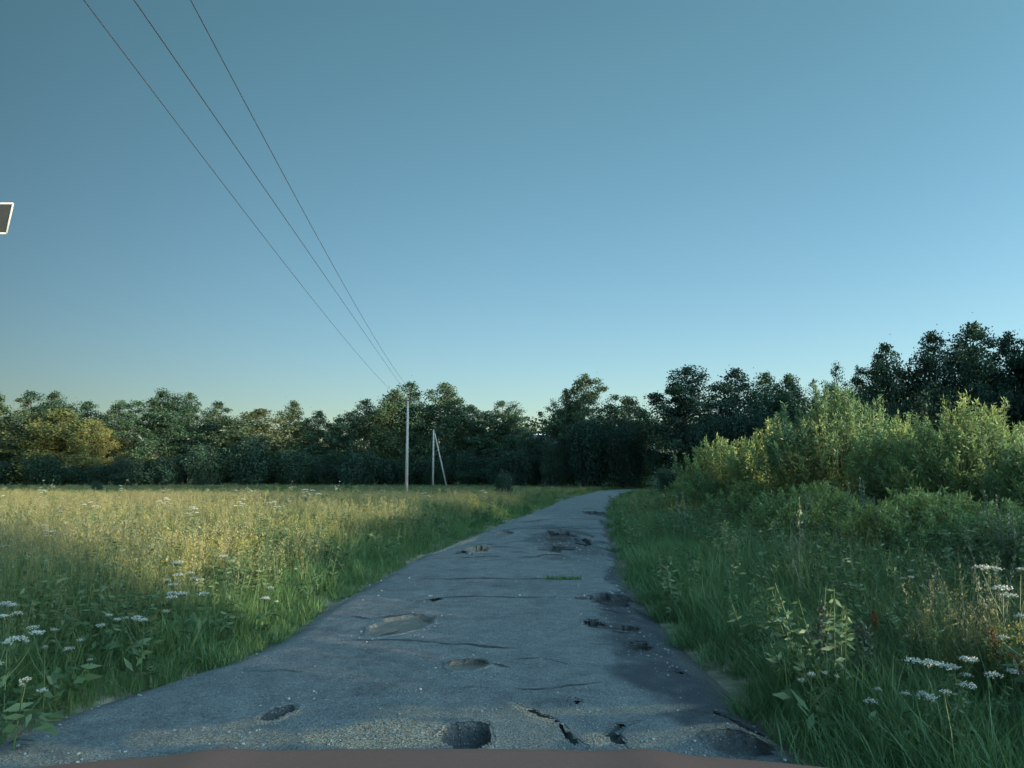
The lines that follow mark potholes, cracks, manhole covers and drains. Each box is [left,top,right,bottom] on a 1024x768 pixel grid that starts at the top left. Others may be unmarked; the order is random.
pothole [251,701,305,724]
crack [331,596,568,667]
pothole [466,545,494,553]
pothole [567,536,596,549]
pothole [432,717,501,749]
pothole [534,546,578,554]
pothole [622,638,658,654]
pothole [567,592,638,609]
pothole [579,617,612,630]
crack [510,682,642,750]
pothole [442,657,494,672]
pothole [361,612,439,638]
